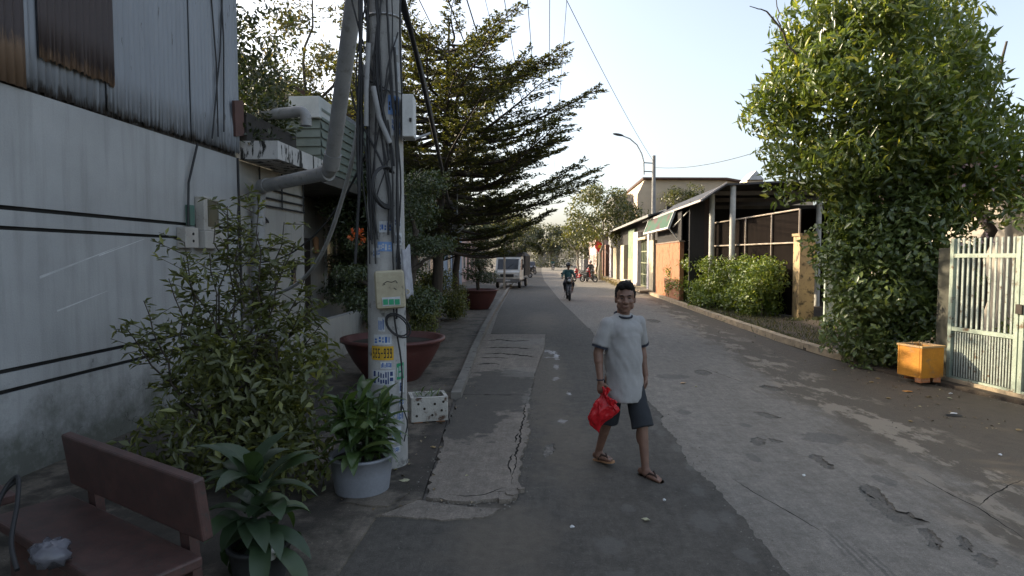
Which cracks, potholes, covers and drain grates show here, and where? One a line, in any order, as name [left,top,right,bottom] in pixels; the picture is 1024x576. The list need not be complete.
pothole [956,535,974,553]
crack [924,479,1022,537]
pothole [749,437,767,446]
pothole [858,484,930,526]
pothole [808,454,835,469]
pothole [917,528,944,550]
crack [450,403,526,497]
pothole [971,553,999,568]
crack [483,339,532,365]
